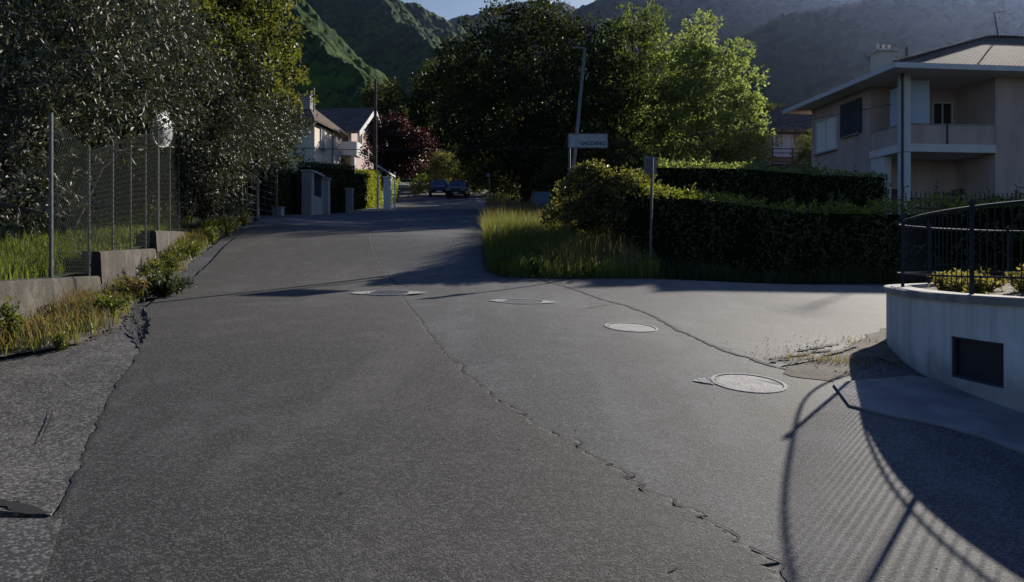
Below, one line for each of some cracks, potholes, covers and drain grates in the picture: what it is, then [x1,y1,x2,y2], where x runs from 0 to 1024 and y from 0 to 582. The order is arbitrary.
manhole cover [604,322,658,332]
manhole cover [693,373,788,393]
crack [546,281,858,372]
crack [33,410,53,445]
